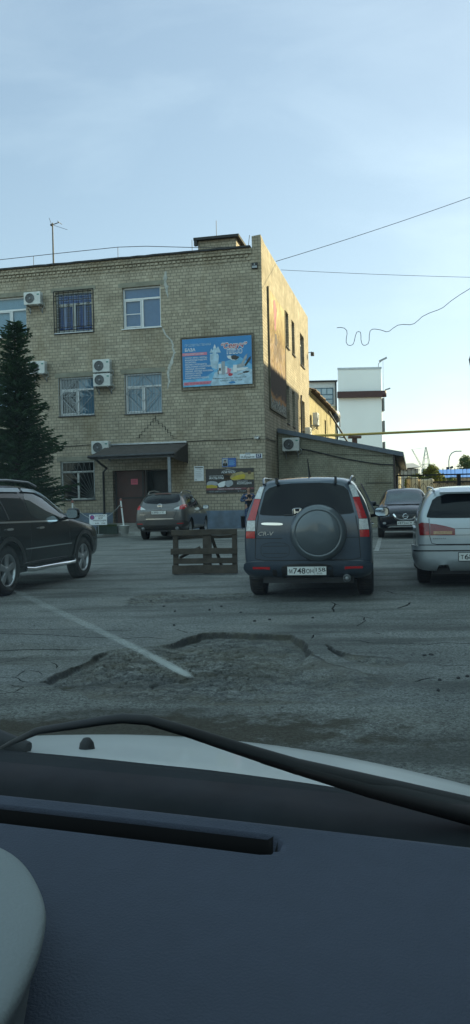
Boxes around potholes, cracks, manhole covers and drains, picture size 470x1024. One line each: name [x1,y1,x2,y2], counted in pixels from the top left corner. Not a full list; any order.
pothole [38,632,394,706]
